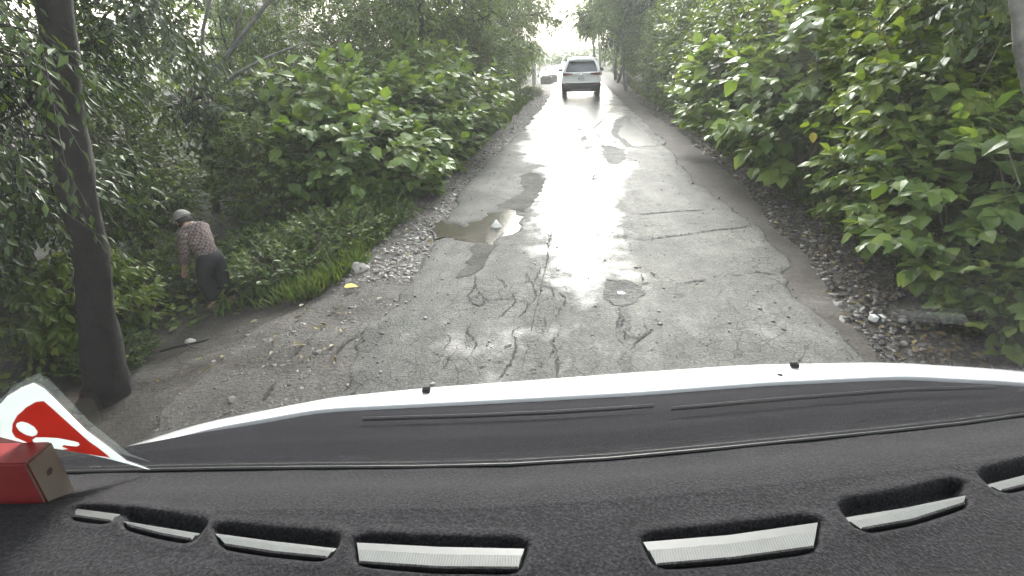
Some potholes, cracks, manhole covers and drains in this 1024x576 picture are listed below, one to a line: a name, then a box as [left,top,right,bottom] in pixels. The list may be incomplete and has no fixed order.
crack [606,276,651,345]
pothole [428,209,526,245]
crack [562,224,758,240]
crack [444,267,566,379]
